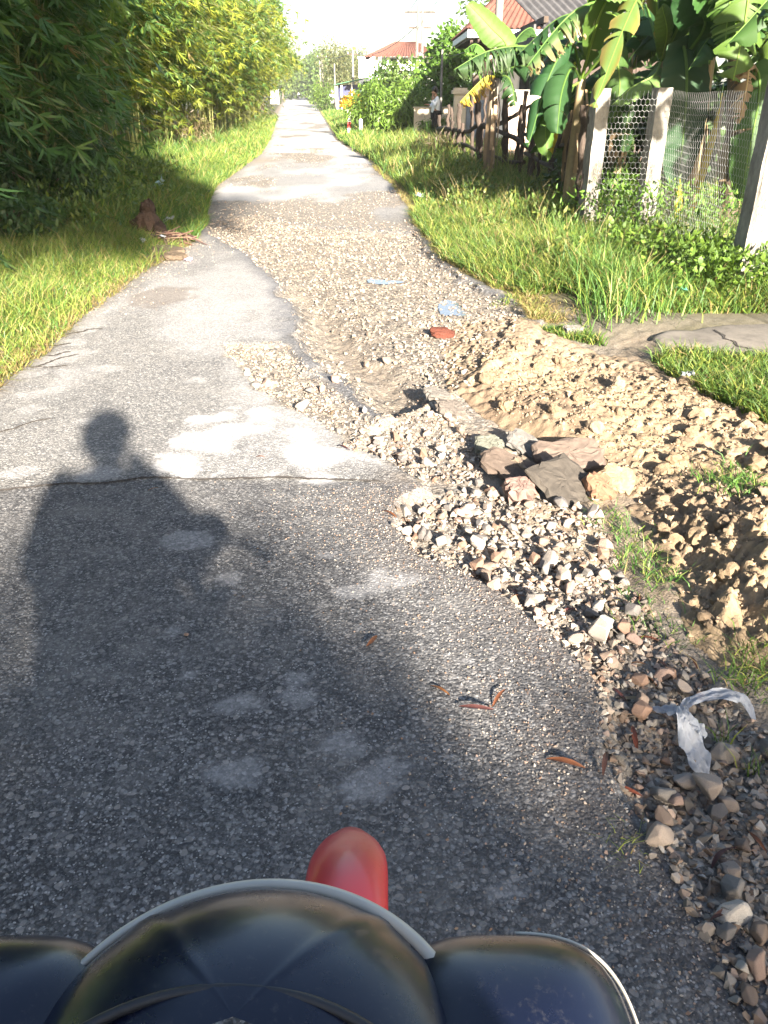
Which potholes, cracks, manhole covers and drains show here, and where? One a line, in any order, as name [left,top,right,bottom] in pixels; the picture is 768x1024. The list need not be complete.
pothole [203,215,521,431]
crack [19,328,103,369]
